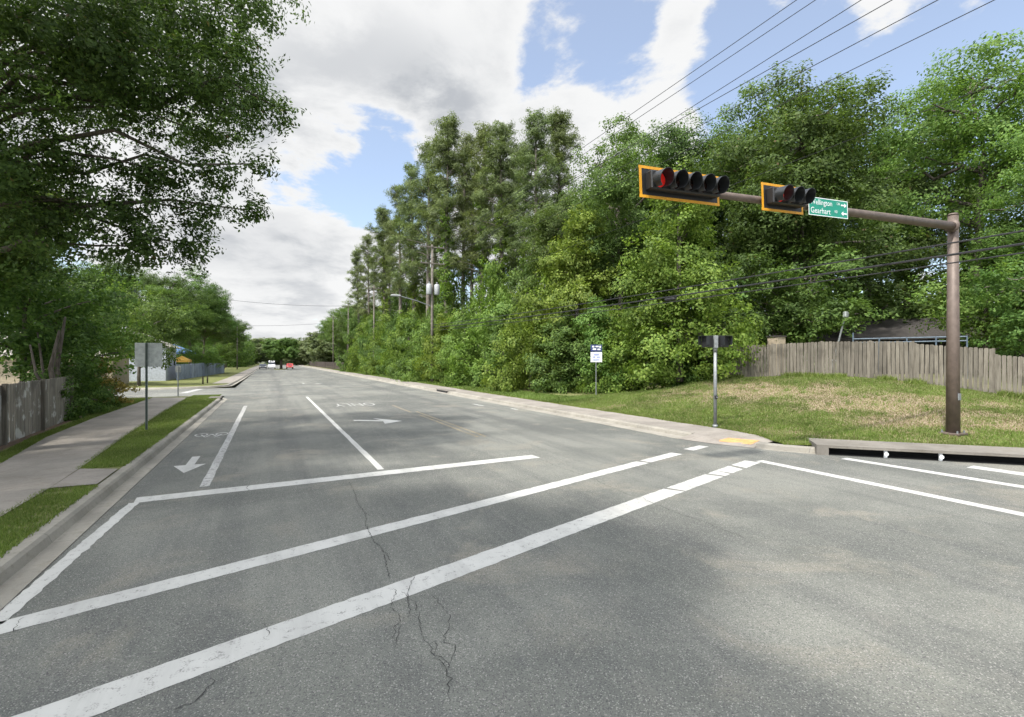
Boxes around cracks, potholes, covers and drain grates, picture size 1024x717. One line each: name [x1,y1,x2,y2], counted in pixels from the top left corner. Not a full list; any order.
crack [390,576,457,692]
drain grate [807,438,1024,465]
crack [349,482,390,576]
